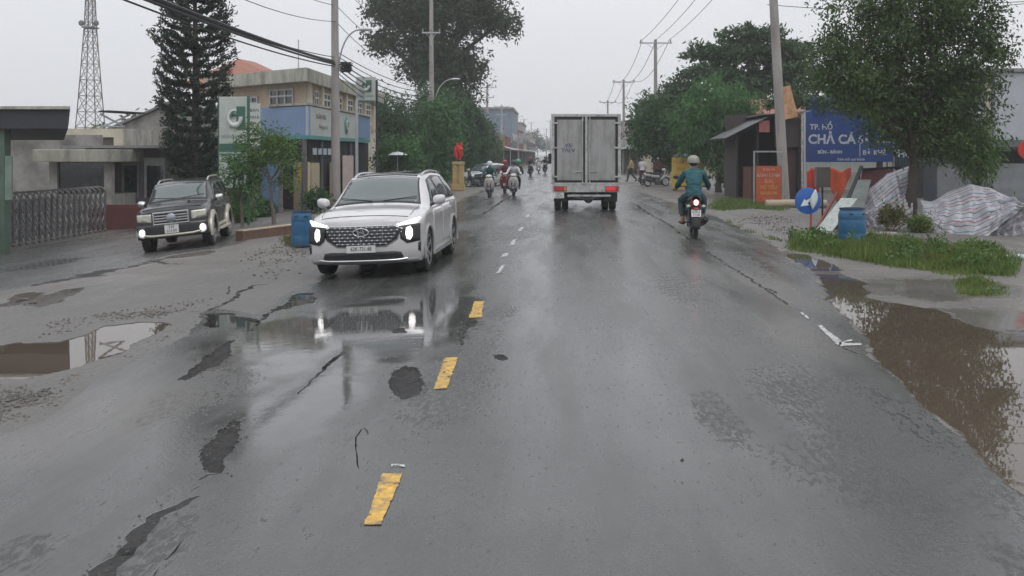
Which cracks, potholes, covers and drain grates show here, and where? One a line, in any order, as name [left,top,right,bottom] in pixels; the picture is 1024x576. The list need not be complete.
pothole [0,322,172,379]
pothole [197,419,242,474]
pothole [388,366,425,400]
pothole [178,340,236,381]
crack [355,419,378,469]
pothole [0,287,86,308]
crack [190,284,267,312]
crack [636,205,788,305]
crack [297,350,345,394]
pothole [202,312,261,332]
